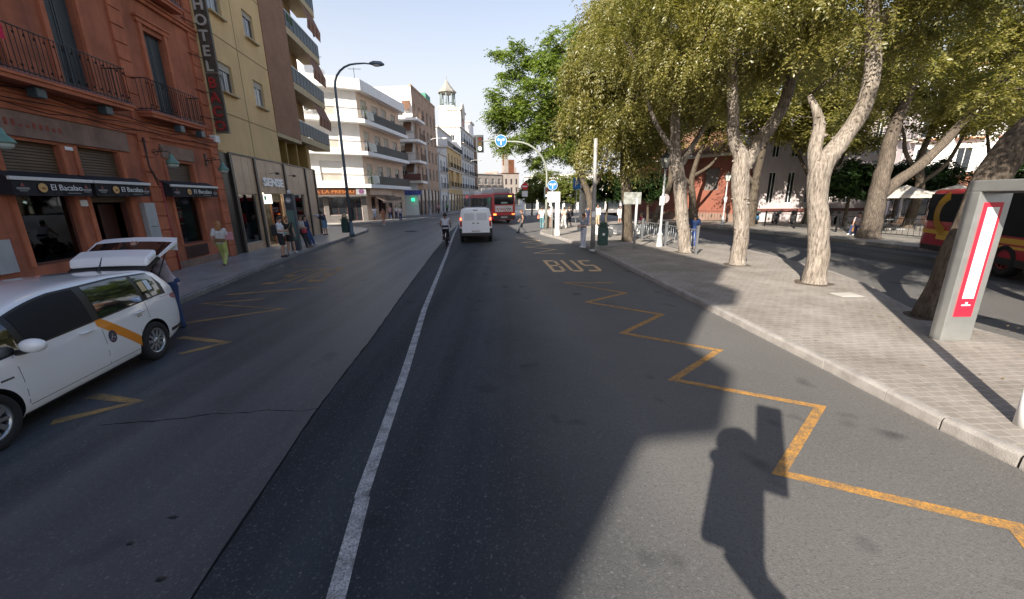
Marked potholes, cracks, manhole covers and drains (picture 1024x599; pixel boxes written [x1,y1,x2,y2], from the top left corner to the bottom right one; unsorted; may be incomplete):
crack [98,408,317,426]
